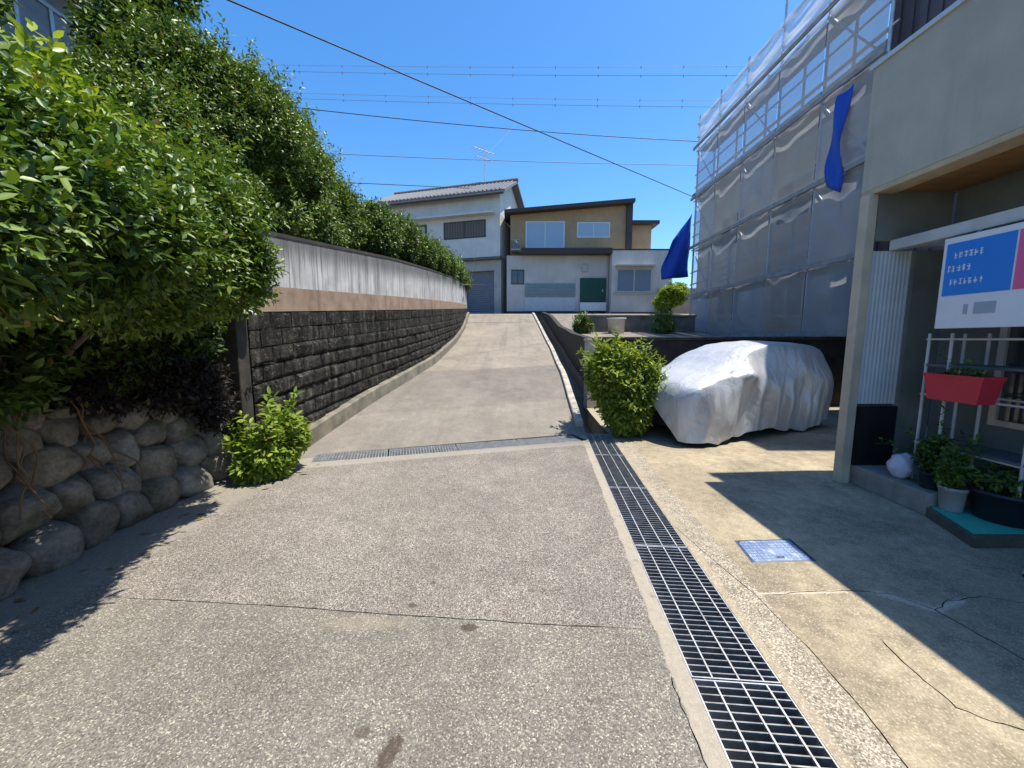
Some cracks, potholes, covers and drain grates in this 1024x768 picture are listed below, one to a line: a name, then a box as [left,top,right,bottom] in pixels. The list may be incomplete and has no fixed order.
drain grate [311,449,388,463]
drain grate [634,545,782,685]
drain grate [389,444,458,456]
crack [671,676,708,768]
drain grate [609,487,687,547]
drain grate [586,434,624,455]
drain grate [594,454,646,488]
drain grate [692,679,840,768]
manhole cover [735,539,816,563]
drain grate [456,440,522,451]
drain grate [517,435,581,446]
crack [679,530,1024,768]
